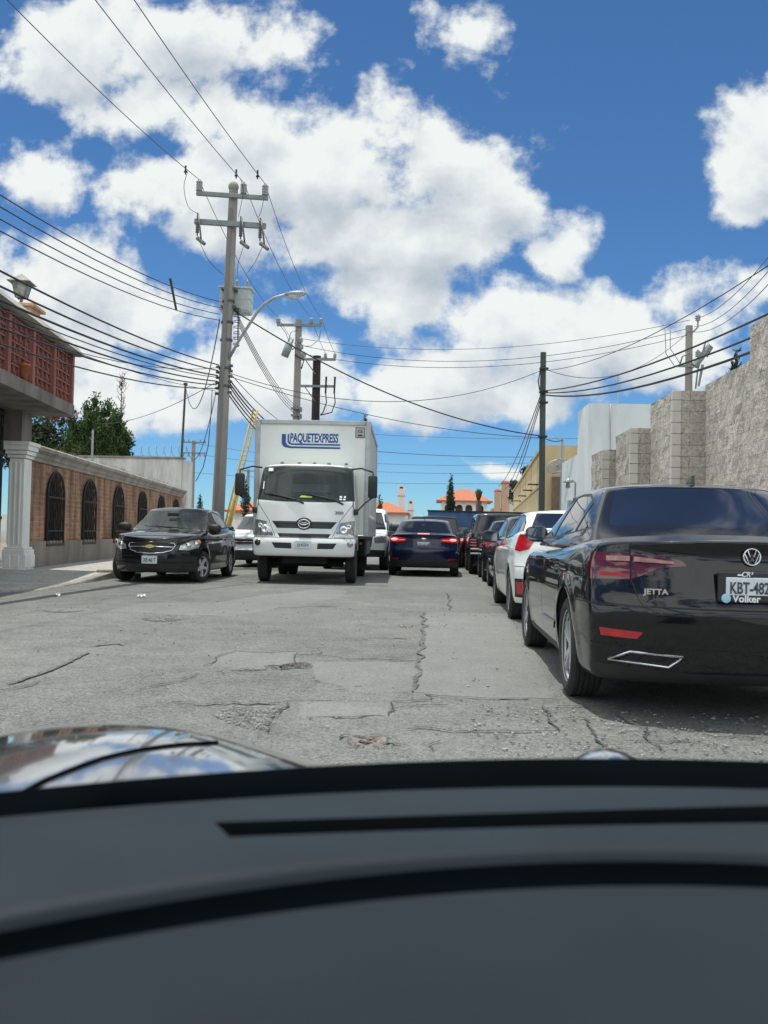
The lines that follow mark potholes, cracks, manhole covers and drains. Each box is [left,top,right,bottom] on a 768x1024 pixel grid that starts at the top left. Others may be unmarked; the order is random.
crack [176,686,762,752]
pothole [264,662,313,671]
pothole [348,734,394,749]
crack [2,643,125,690]
